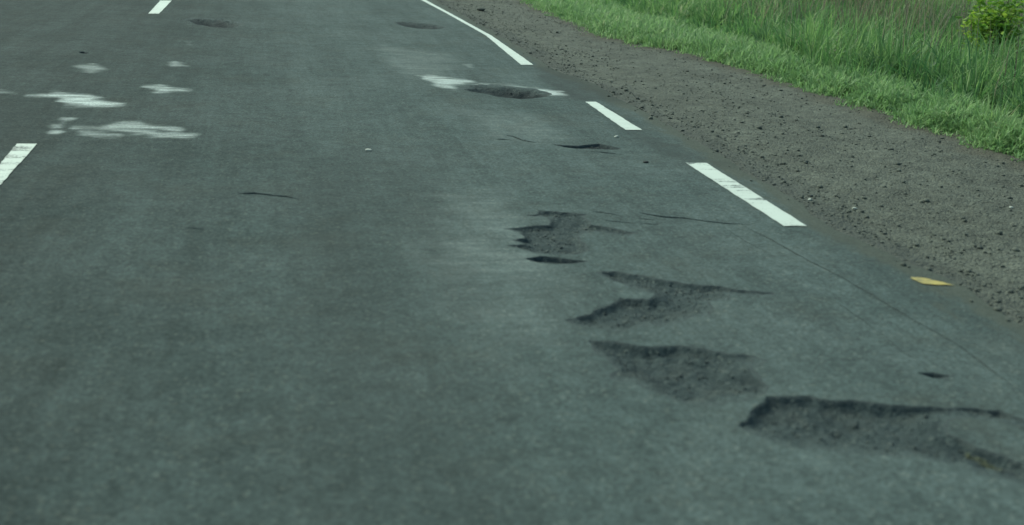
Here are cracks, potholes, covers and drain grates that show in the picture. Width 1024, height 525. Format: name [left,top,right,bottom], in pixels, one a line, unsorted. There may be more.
crack [599,212,749,225]
